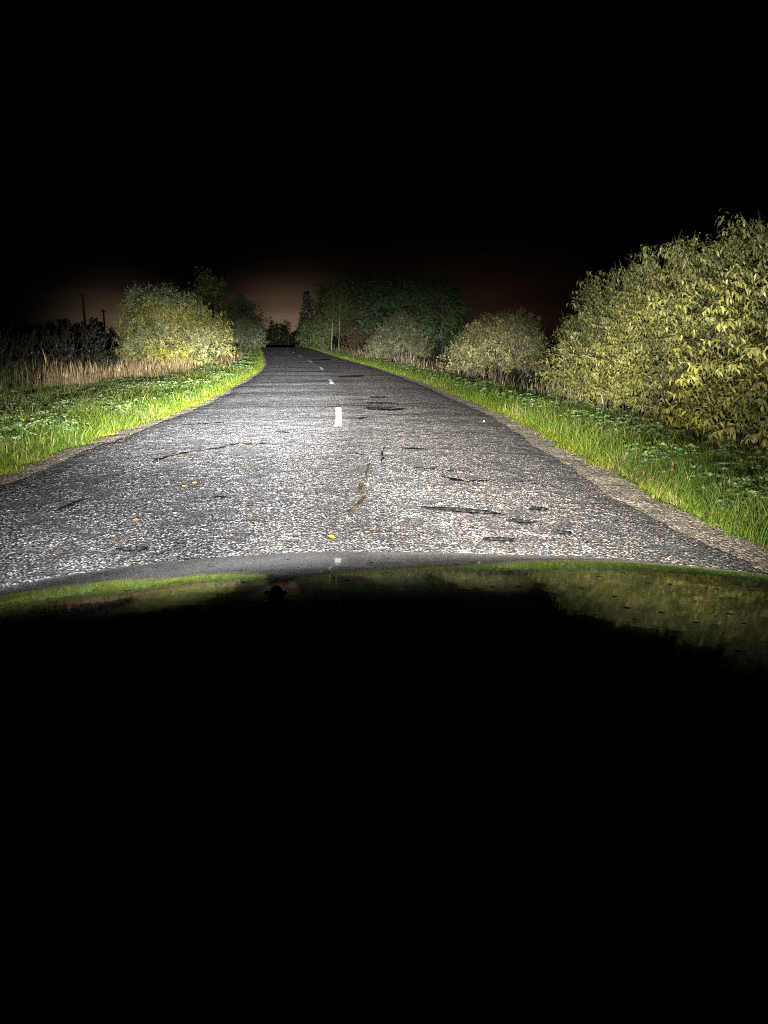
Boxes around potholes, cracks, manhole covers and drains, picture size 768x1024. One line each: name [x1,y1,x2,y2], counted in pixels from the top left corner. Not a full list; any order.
crack [152,431,289,462]
crack [325,449,384,542]
crack [413,467,489,482]
crack [46,498,88,513]
